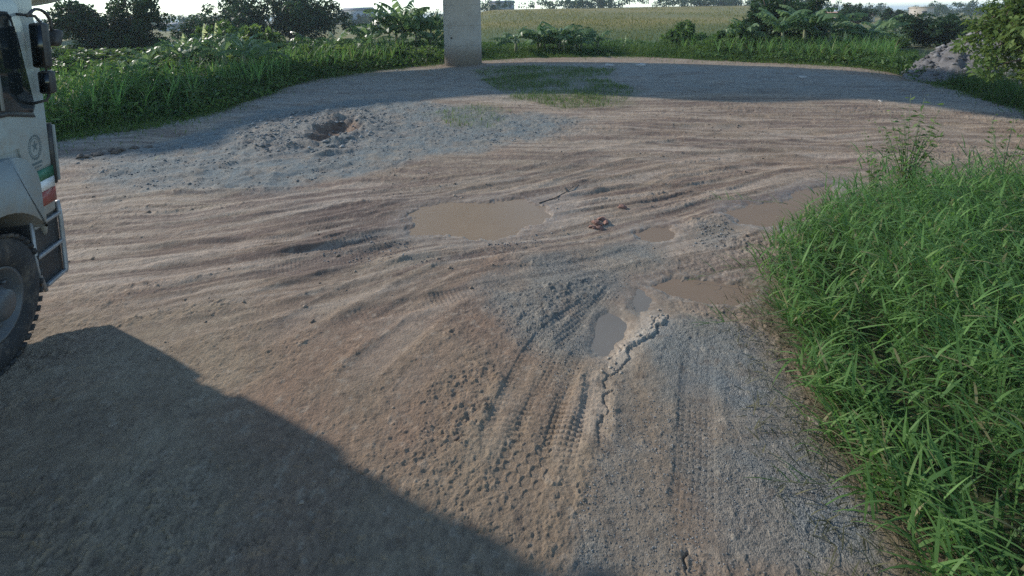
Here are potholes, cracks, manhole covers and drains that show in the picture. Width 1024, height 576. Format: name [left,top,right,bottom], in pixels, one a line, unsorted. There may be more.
pothole [581,305,639,360]
pothole [302,112,372,143]
pothole [396,196,556,243]
pothole [634,271,773,309]
pothole [623,281,663,321]
pothole [714,179,849,233]
pothole [627,223,685,245]
